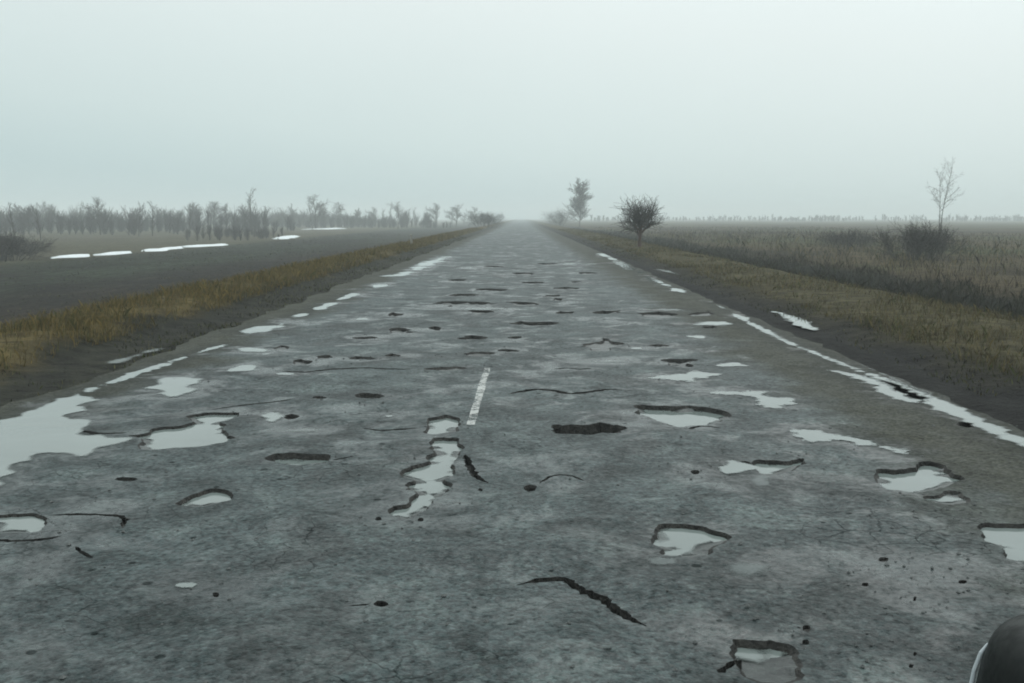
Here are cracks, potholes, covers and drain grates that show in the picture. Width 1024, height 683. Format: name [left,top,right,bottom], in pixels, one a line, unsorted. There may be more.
pothole [634,405,732,427]
pothole [651,523,732,557]
pothole [977,523,1024,561]
crack [463,455,488,491]
pothole [388,437,465,520]
crack [518,577,646,626]
